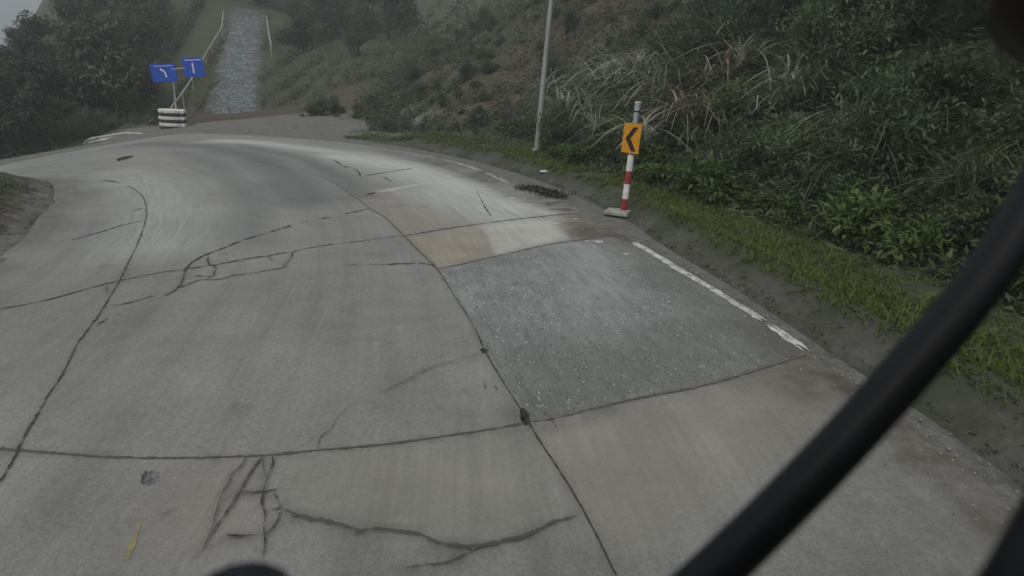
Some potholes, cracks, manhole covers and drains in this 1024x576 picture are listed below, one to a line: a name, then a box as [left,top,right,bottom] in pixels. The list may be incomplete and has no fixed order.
pothole [140,470,160,486]
crack [203,455,576,568]
crack [0,159,398,483]
